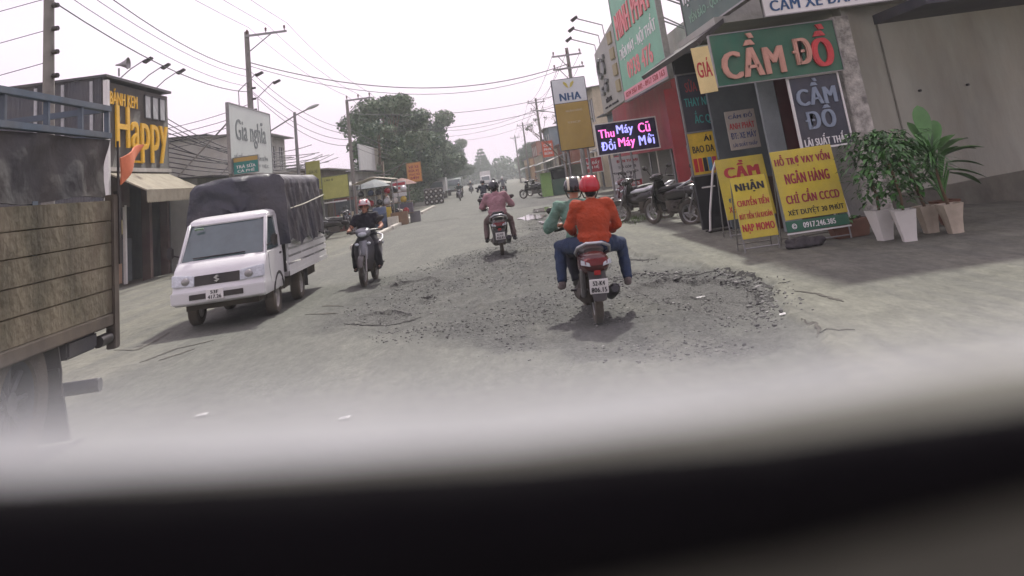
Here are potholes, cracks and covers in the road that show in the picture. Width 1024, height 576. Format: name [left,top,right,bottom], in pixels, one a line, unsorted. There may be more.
crack [125,333,213,363]
pothole [626,274,773,319]
crack [801,318,855,338]
pothole [385,276,446,293]
pothole [355,308,416,325]
